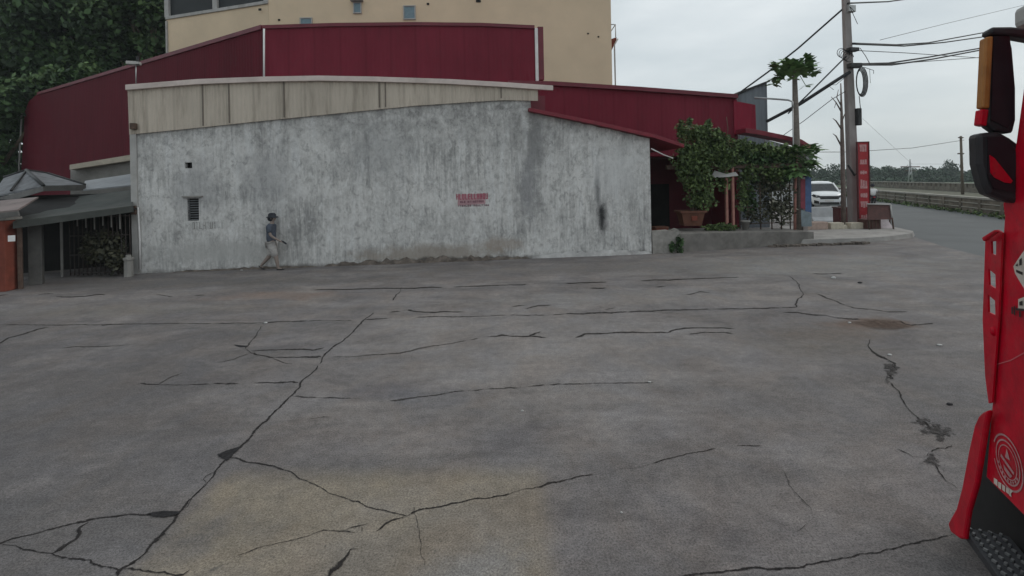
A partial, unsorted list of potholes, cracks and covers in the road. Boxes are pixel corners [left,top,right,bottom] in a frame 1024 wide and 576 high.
crack [682,534,952,576]
crack [868,340,929,427]
crack [565,273,932,325]
crack [0,282,714,576]
